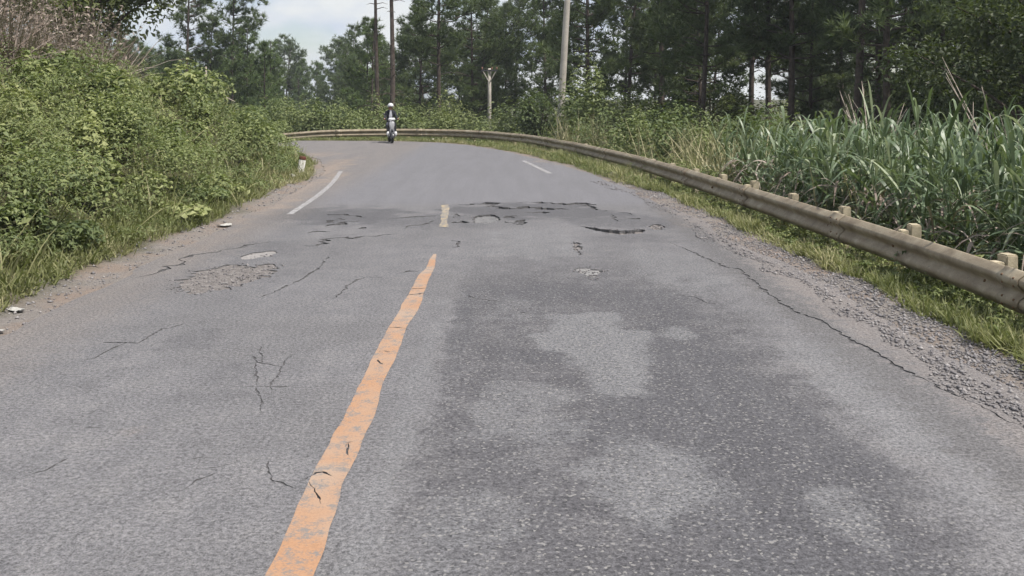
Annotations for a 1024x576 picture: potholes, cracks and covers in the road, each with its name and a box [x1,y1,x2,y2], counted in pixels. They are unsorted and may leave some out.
crack [84,324,182,361]
crack [140,241,271,277]
pothole [471,214,500,224]
crack [452,202,640,225]
pothole [573,266,609,280]
crack [246,346,294,411]
crack [266,462,327,501]
crack [261,214,432,297]
crack [670,242,1024,427]
pothole [578,225,645,235]
pothole [166,262,284,295]
